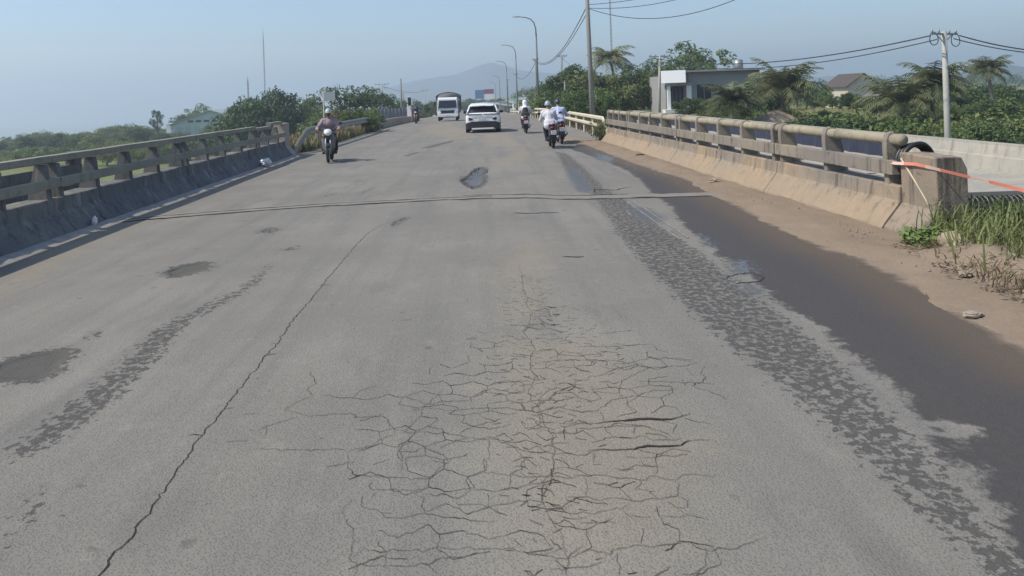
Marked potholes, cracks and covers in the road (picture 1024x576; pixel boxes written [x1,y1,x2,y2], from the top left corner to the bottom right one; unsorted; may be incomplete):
crack [98,225,382,576]
crack [225,266,764,576]
pothole [457,167,492,190]
